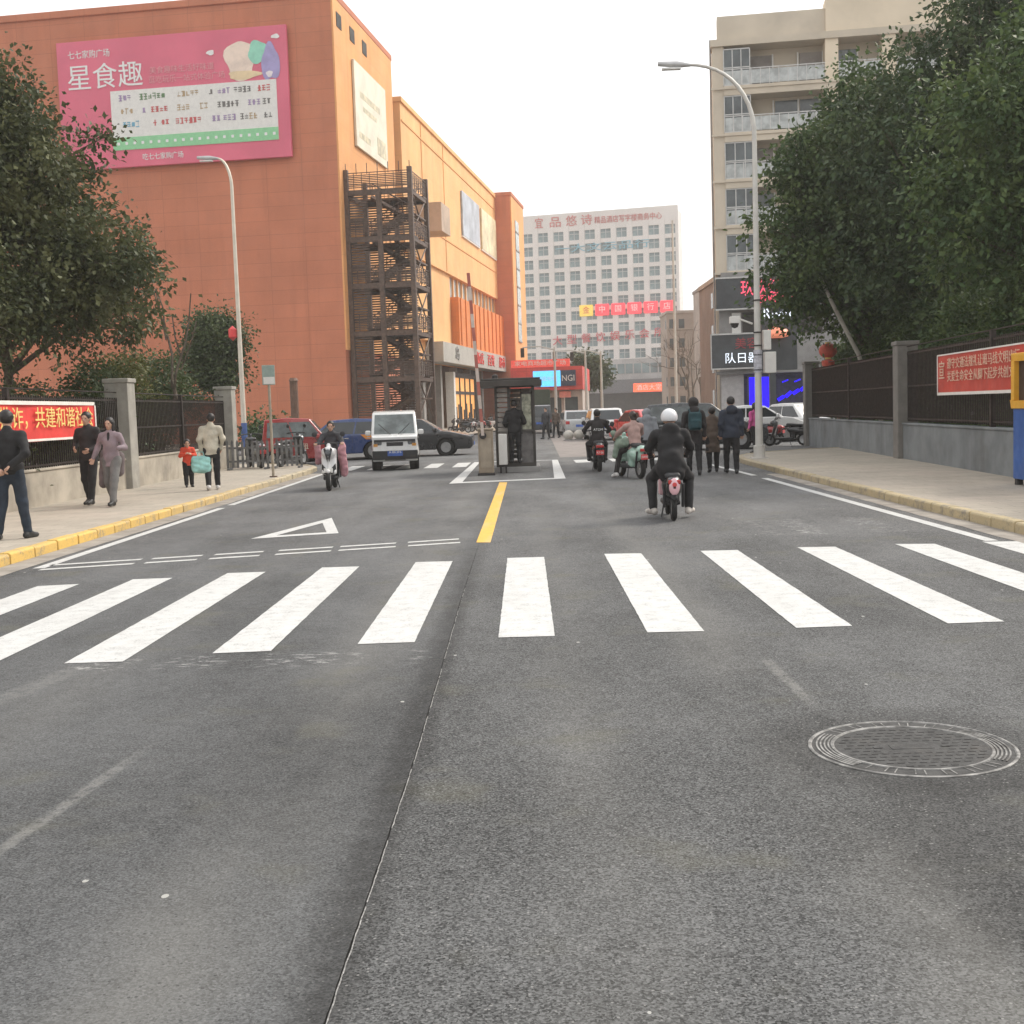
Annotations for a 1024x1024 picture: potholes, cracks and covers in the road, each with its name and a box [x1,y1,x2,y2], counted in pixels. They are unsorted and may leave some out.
manhole cover [808,721,1020,778]
